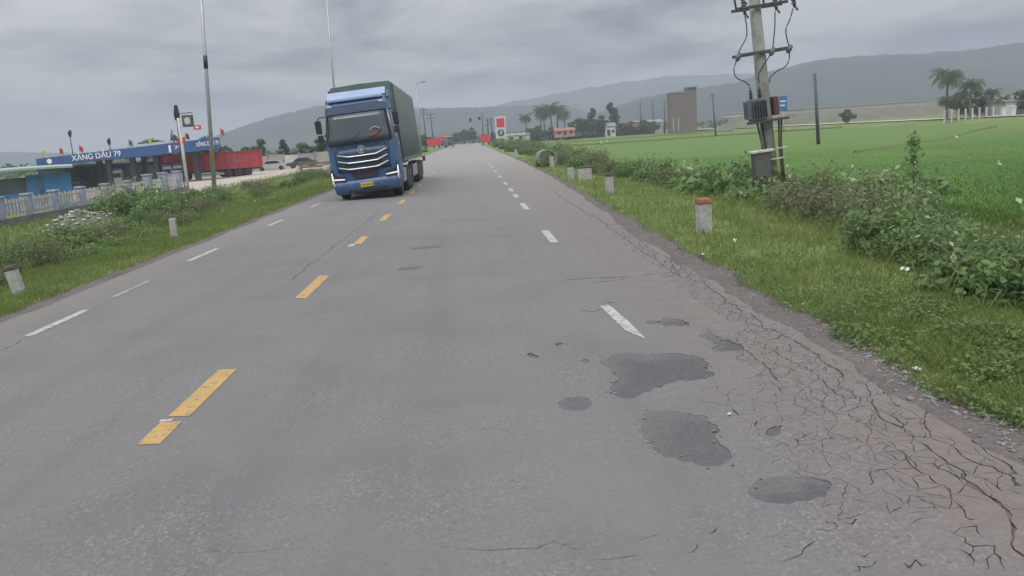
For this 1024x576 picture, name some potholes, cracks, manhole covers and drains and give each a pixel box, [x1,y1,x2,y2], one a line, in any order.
crack [436,541,574,551]
crack [555,192,1024,569]
